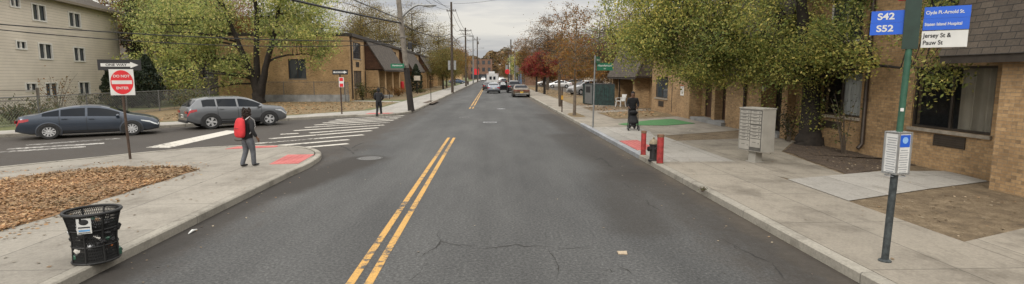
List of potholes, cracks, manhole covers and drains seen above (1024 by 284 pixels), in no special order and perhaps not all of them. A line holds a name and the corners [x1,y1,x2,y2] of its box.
crack [410,235,571,280]
